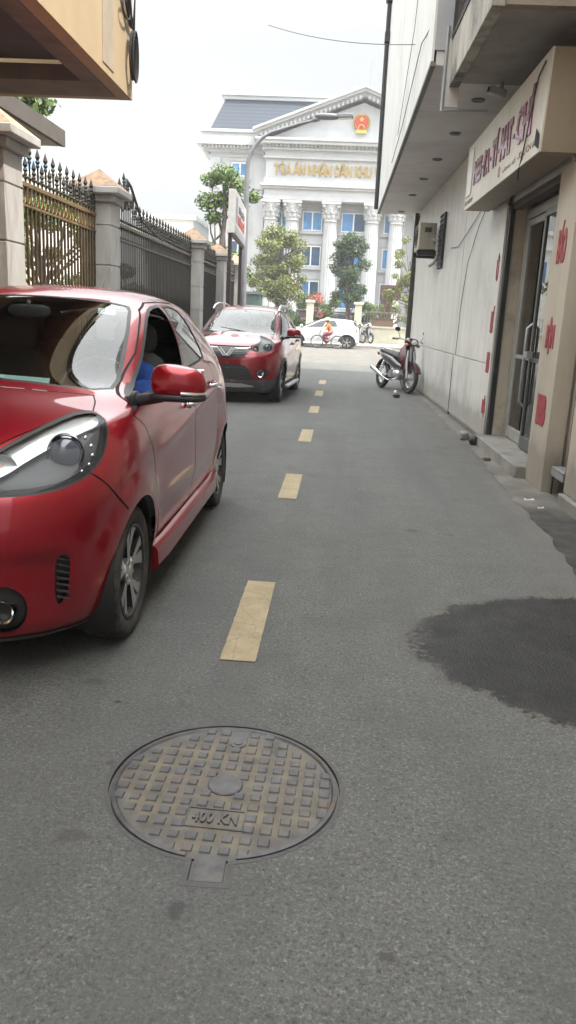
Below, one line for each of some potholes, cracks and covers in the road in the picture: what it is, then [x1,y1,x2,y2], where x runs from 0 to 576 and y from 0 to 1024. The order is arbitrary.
manhole cover [104,724,344,889]
